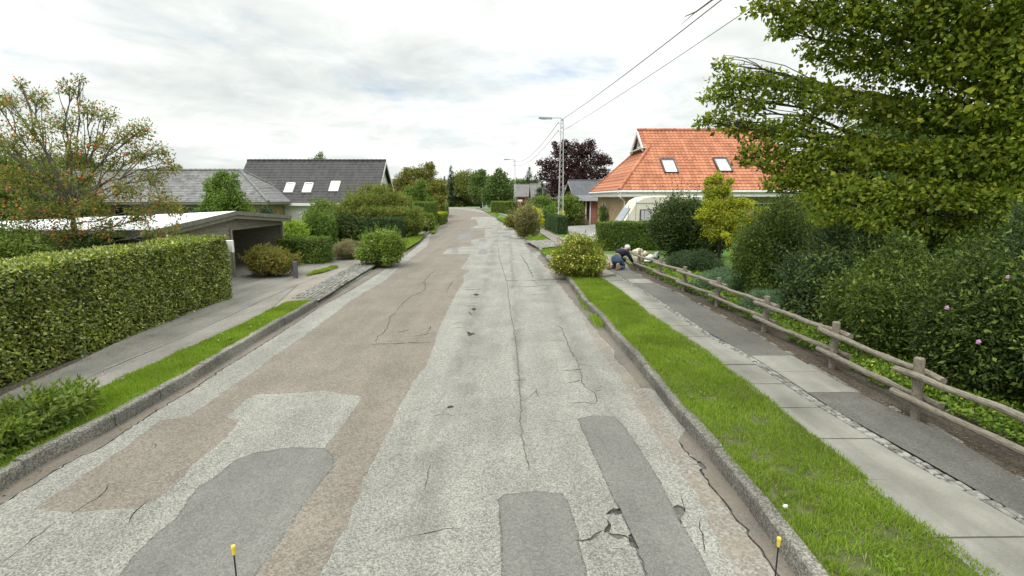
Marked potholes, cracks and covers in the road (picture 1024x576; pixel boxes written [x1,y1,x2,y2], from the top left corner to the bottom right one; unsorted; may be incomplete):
crack [5,486,108,561]
crack [578,501,647,574]
crack [558,326,598,404]
crack [373,270,481,345]
crack [671,441,780,576]
